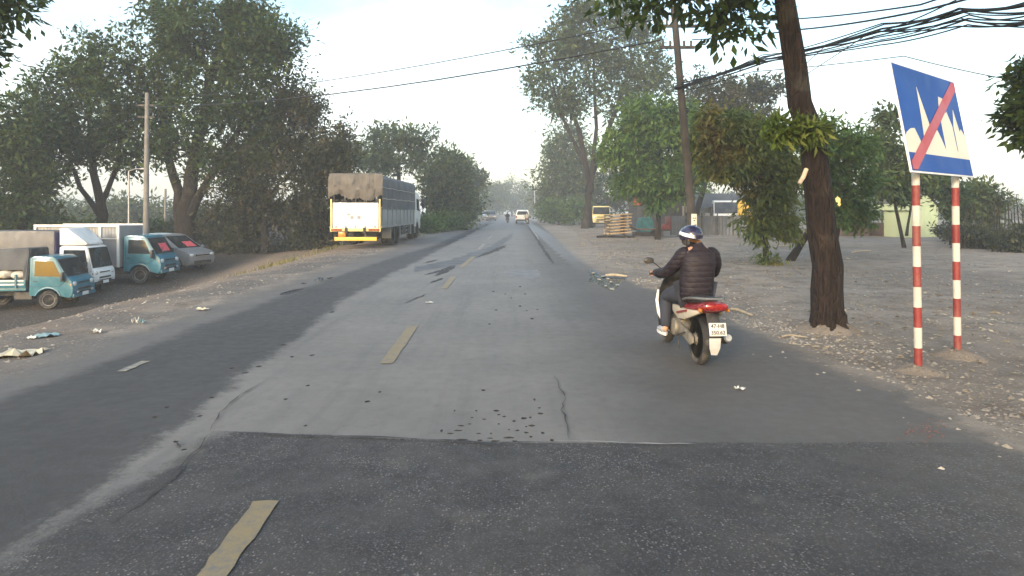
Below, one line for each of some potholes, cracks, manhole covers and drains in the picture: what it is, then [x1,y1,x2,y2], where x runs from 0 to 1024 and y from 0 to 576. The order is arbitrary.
crack [112,386,255,522]
